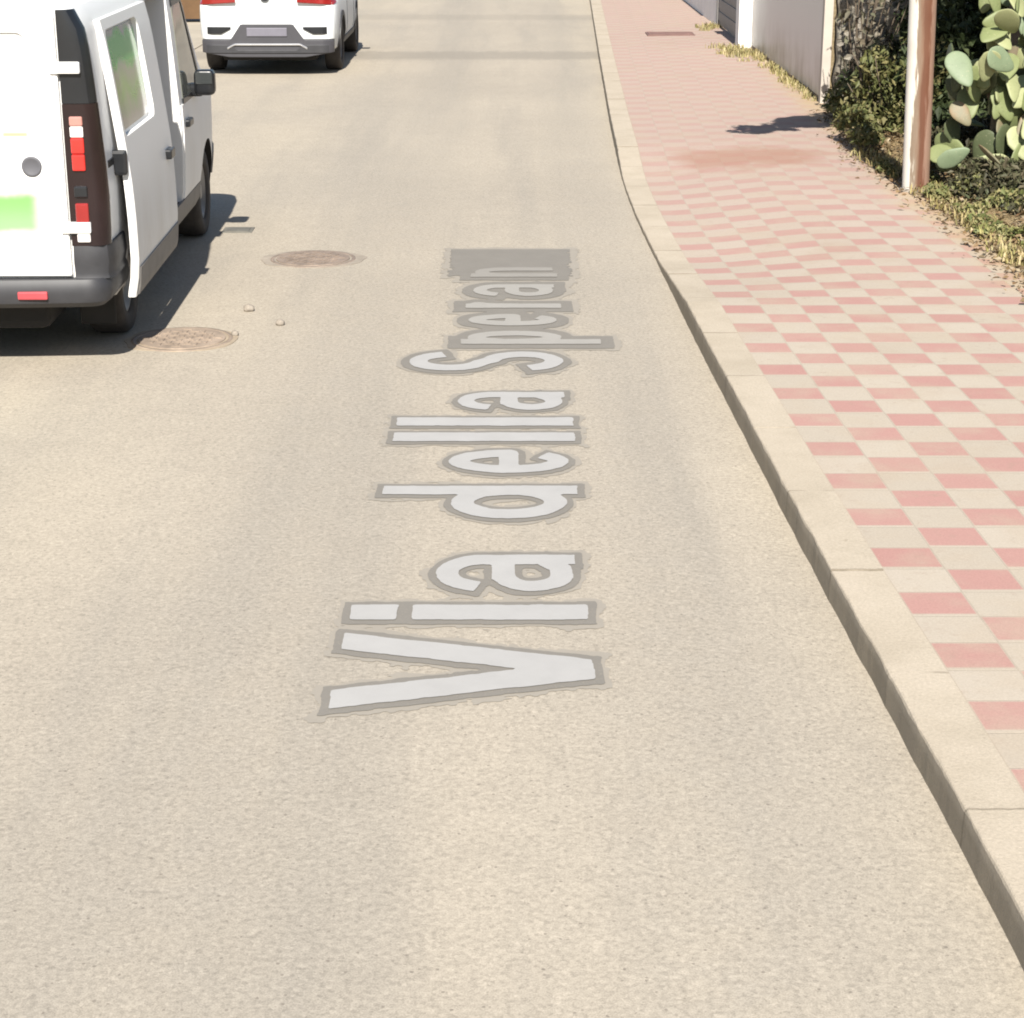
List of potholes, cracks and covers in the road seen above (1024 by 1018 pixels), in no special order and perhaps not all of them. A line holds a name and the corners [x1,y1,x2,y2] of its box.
manhole cover [261,250,367,268]
manhole cover [124,327,238,352]
